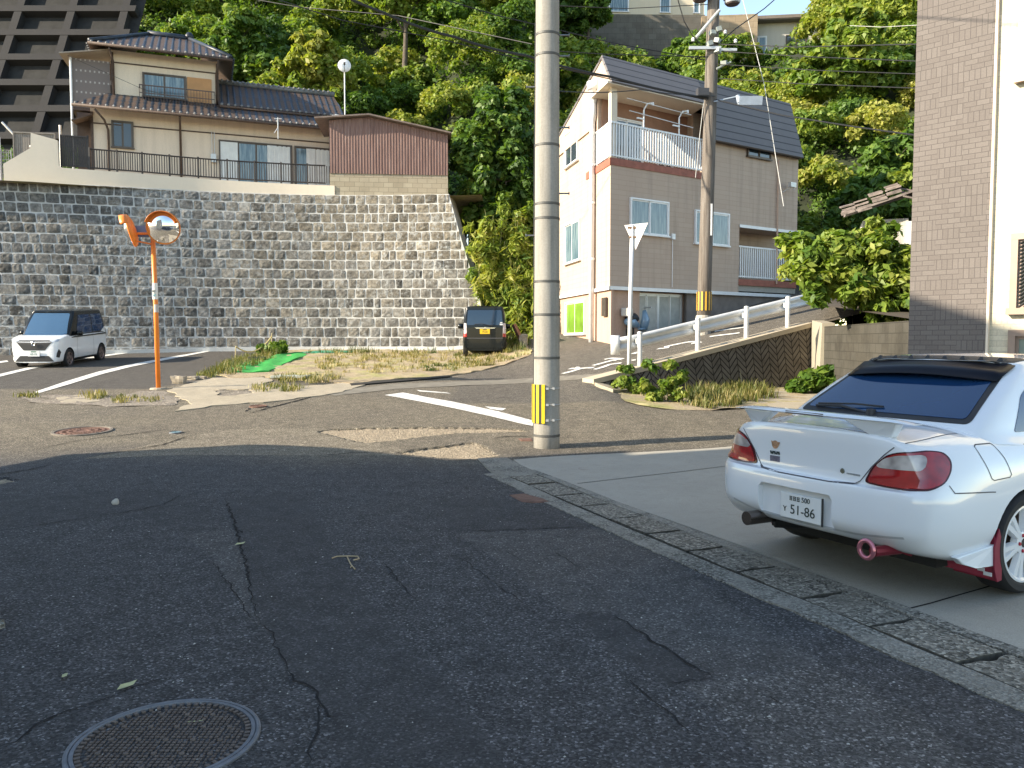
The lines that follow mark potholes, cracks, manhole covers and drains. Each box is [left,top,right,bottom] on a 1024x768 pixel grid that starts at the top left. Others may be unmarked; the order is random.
crack [576,612,710,737]
manhole cover [62,698,261,768]
manhole cover [51,426,114,437]
crack [213,500,343,764]
crack [3,676,182,745]
utility cover [509,493,548,503]
